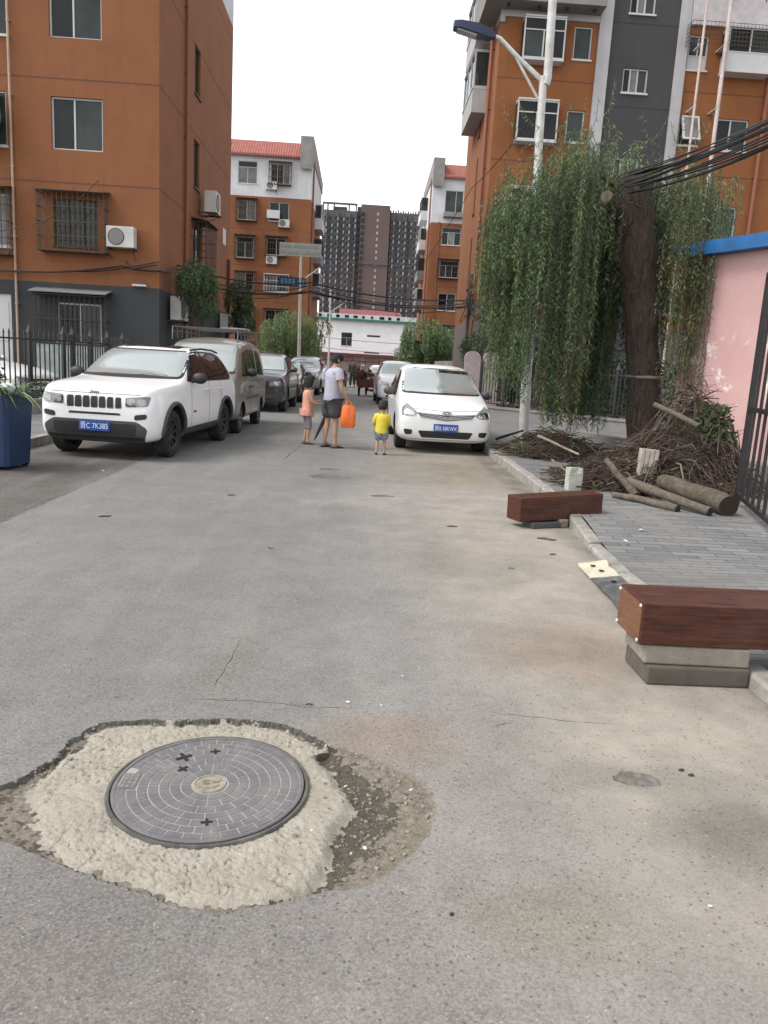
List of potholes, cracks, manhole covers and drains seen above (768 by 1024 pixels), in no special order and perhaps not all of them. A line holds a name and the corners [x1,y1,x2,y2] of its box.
manhole cover [104,736,309,850]
crack [188,638,339,708]
crack [494,714,626,727]
